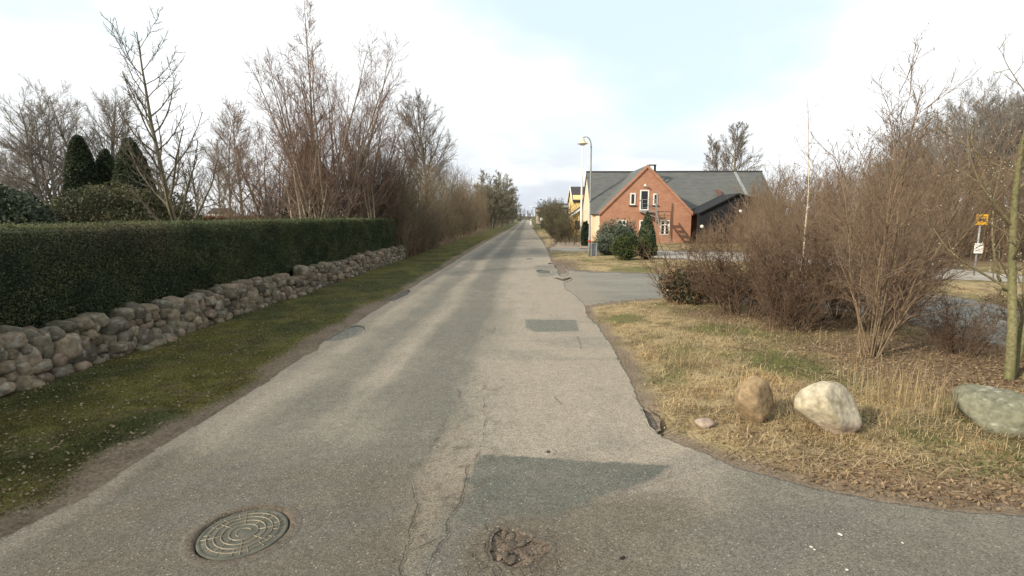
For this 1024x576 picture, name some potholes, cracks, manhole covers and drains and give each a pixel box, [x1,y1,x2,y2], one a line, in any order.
manhole cover [179,501,302,568]
pothole [477,523,557,574]
crack [392,389,564,576]
pothole [640,407,661,432]
